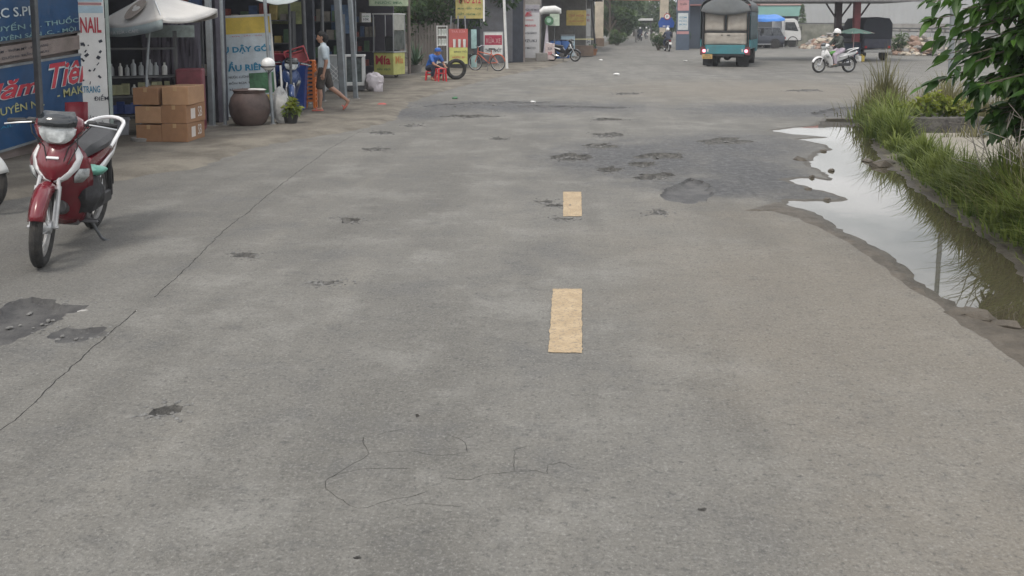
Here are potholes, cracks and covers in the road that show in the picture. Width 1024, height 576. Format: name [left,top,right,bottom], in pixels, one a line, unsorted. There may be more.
pothole [304,277,357,288]
pothole [0,295,98,346]
pothole [640,208,676,219]
crack [325,429,583,508]
pothole [329,215,368,225]
pothole [621,171,676,181]
pothole [42,325,112,345]
pothole [550,151,596,163]
pothole [632,151,688,163]
pothole [597,165,625,174]
pothole [660,178,715,204]
pothole [130,398,194,423]
